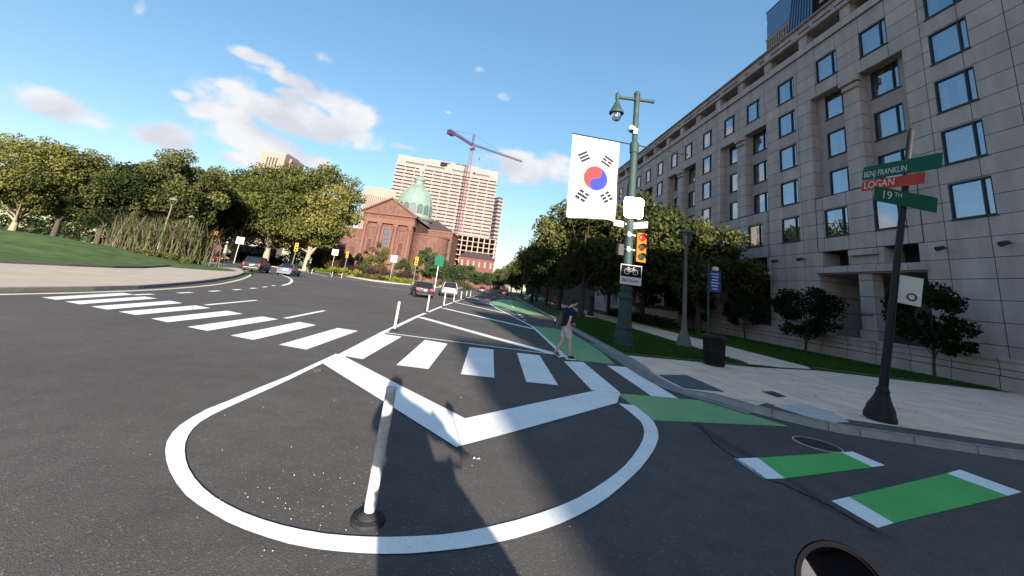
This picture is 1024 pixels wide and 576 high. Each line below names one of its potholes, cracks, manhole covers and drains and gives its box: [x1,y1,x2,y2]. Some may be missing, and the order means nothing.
crack [697,424,876,532]
manhole cover [792,436,844,453]
